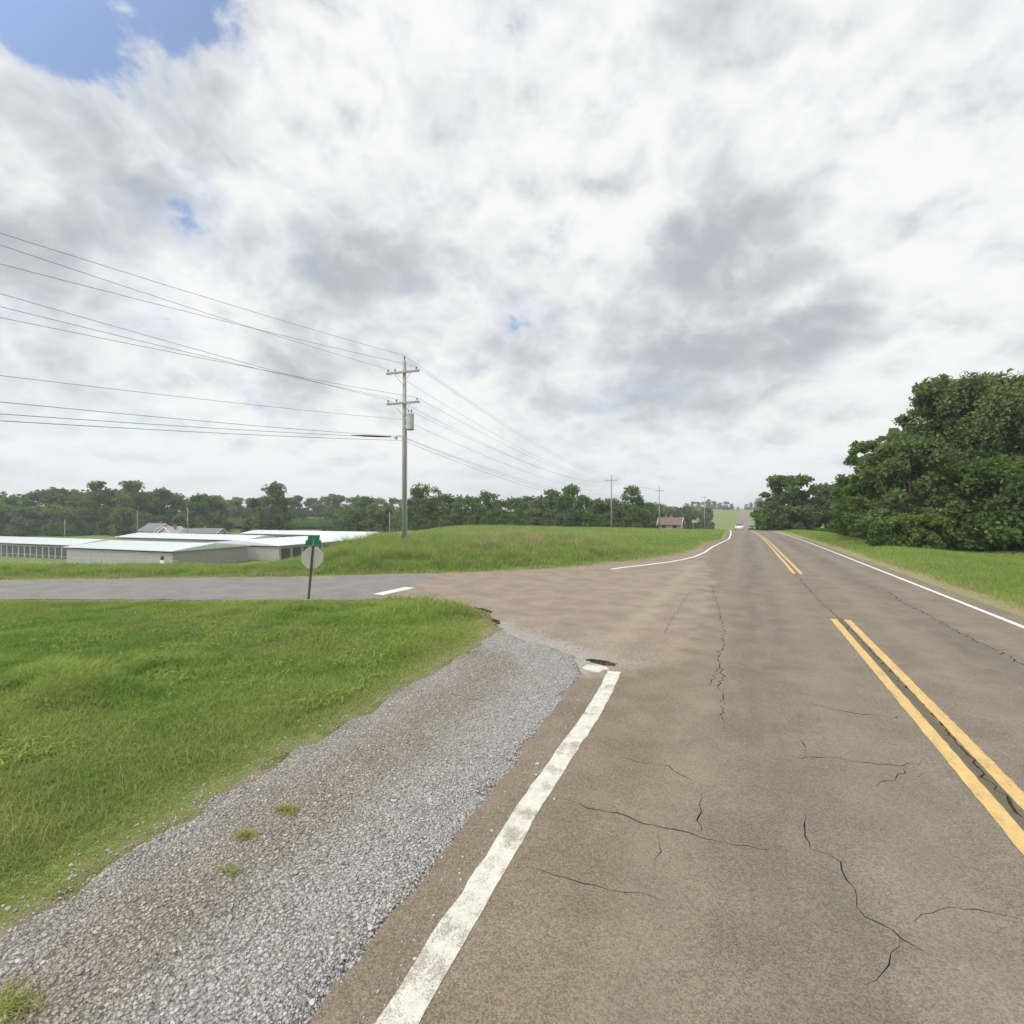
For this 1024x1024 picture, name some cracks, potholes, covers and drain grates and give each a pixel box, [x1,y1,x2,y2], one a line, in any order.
crack [710,587,725,728]
crack [880,588,1024,672]
crack [803,813,1022,984]
crack [527,867,663,901]
crack [792,742,935,786]
crack [559,757,764,864]
